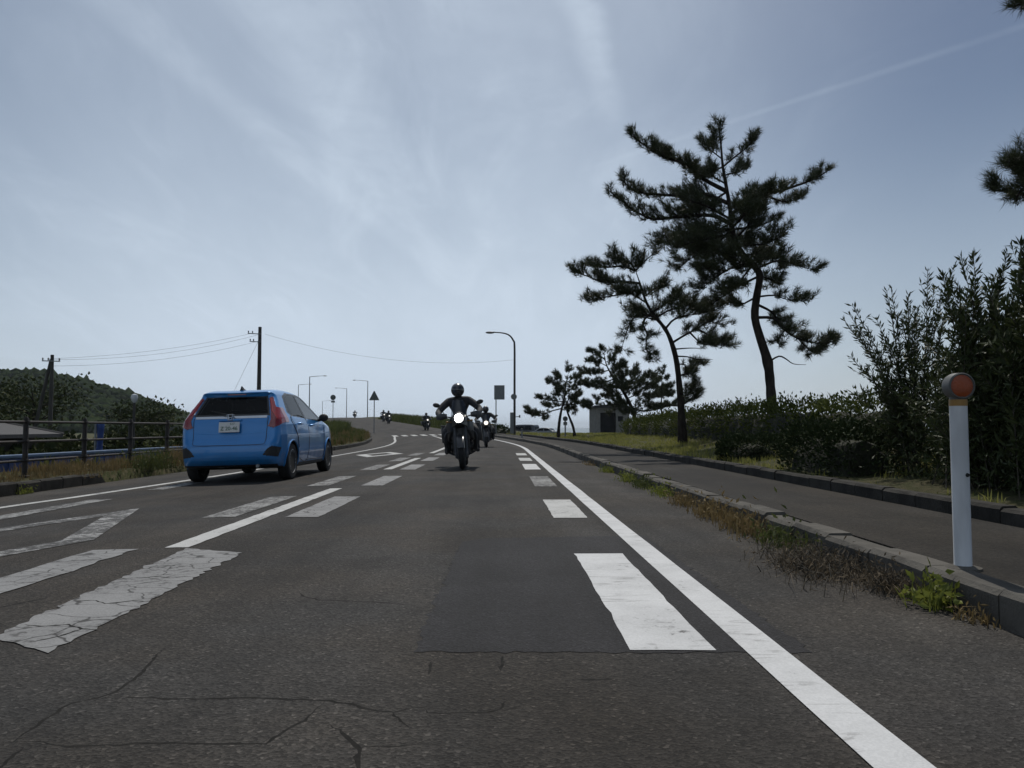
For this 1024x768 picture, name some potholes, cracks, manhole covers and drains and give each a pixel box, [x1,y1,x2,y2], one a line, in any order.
crack [0,646,510,768]
crack [25,624,97,643]
